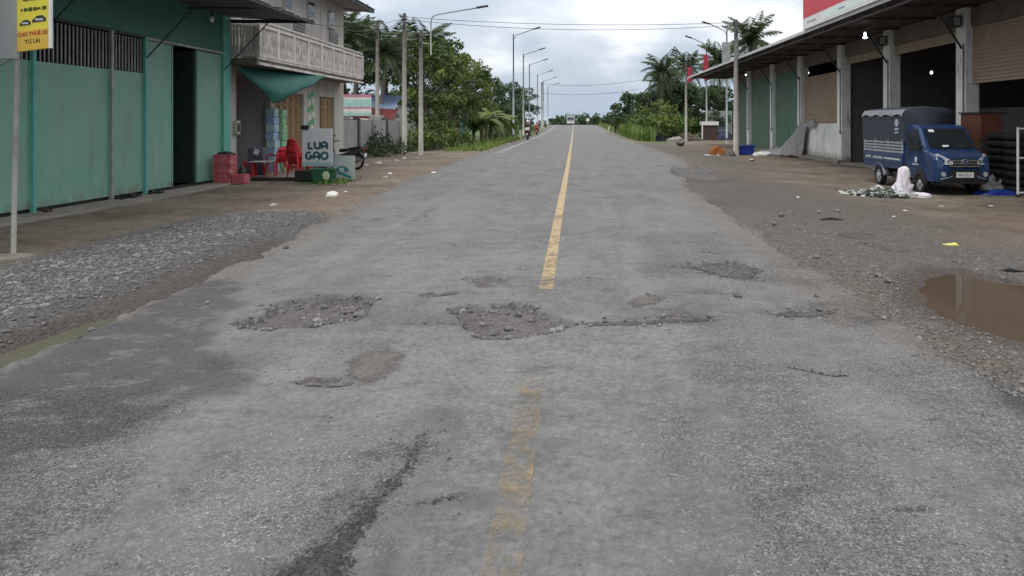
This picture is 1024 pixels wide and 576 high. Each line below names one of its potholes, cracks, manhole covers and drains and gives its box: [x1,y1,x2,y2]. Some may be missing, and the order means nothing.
pothole [446,302,566,340]
crack [787,367,846,377]
pothole [461,276,505,288]
pothole [677,260,773,282]
pothole [766,306,838,320]
pothole [230,294,382,331]
